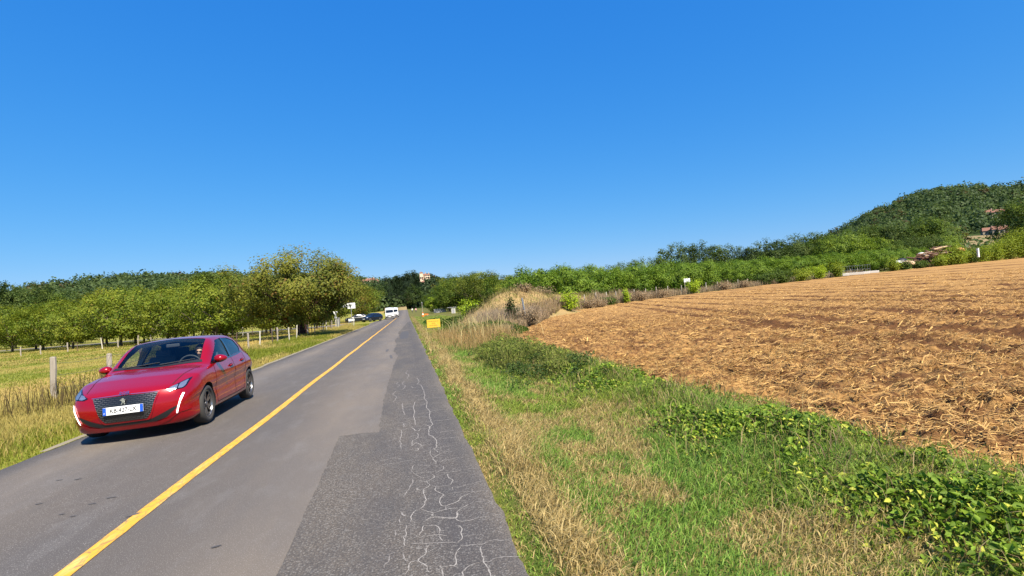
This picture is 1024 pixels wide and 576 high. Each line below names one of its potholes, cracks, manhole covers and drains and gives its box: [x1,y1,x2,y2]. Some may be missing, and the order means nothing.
crack [357,329,519,576]
